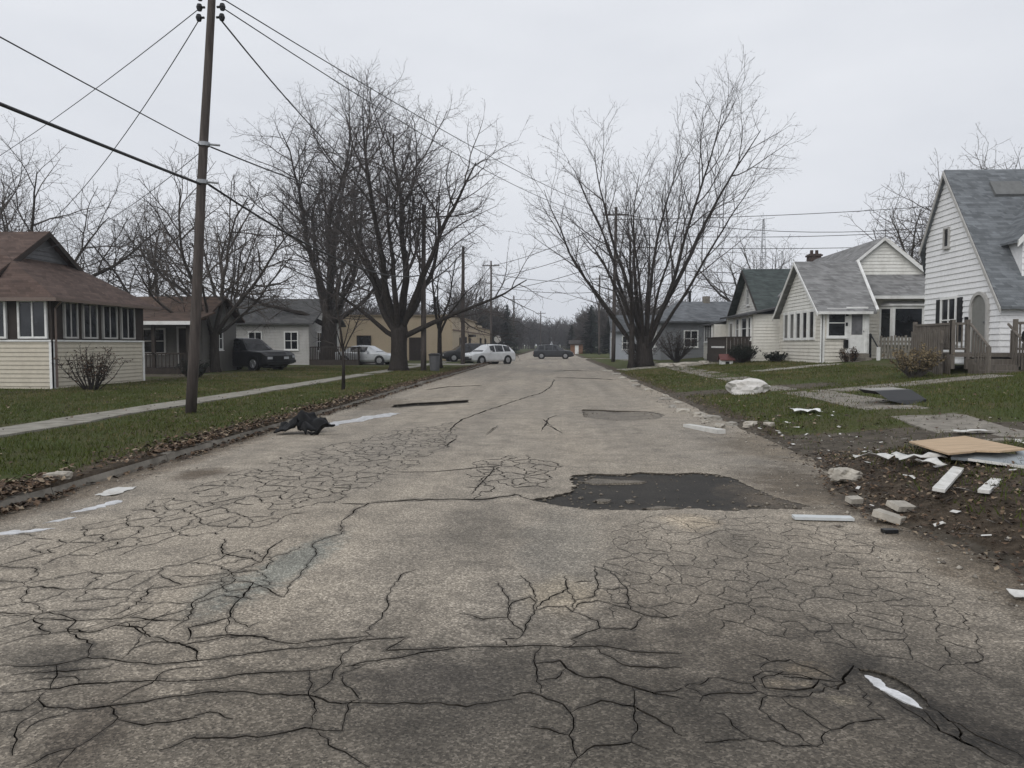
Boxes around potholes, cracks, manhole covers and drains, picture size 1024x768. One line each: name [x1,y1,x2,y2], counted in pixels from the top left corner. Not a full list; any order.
crack [0,422,1023,768]
crack [444,370,612,447]
pothole [530,472,810,511]
